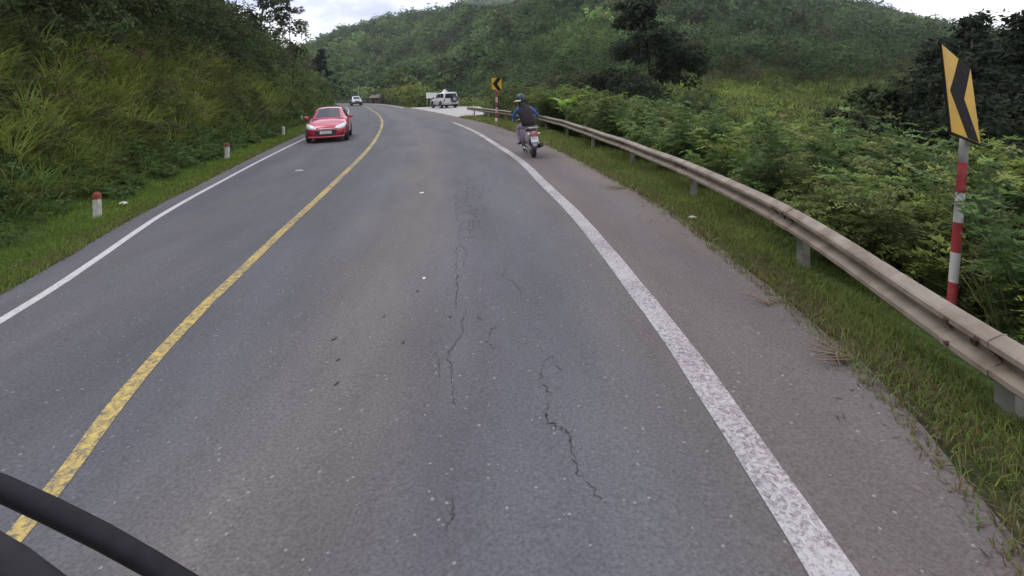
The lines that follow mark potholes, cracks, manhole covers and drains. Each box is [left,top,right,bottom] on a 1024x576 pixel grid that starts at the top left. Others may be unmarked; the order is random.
crack [435,177,495,403]
crack [539,355,608,504]
